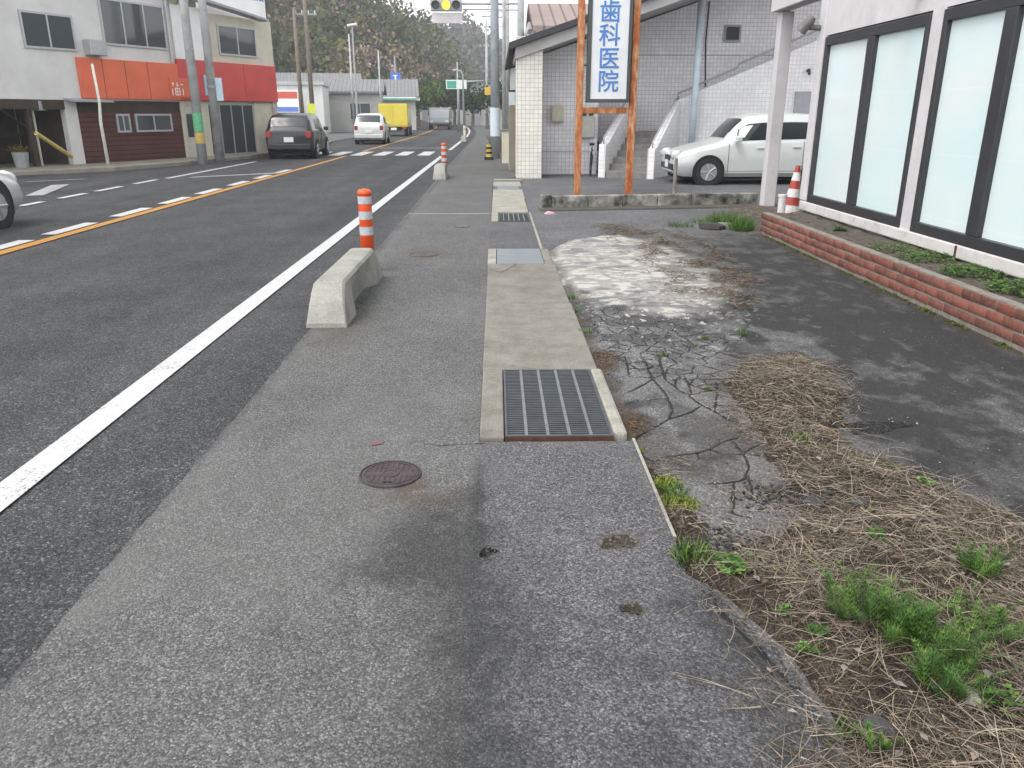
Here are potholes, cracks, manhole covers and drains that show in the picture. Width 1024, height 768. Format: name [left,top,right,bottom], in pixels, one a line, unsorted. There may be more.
crack [580,307,758,518]
pothole [839,421,913,435]
manhole cover [359,460,421,489]
drain grate [498,213,530,222]
drain grate [503,369,613,442]
